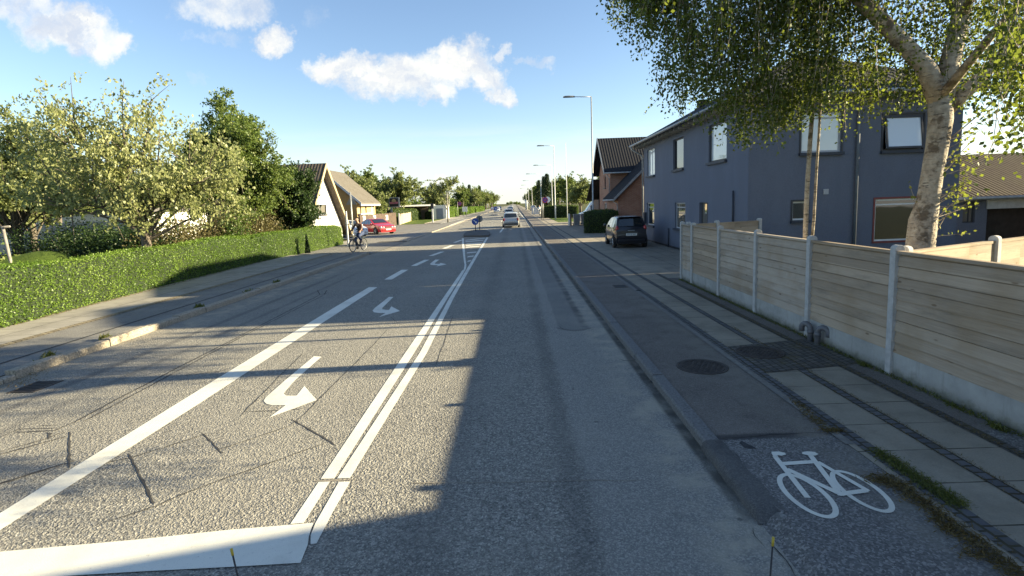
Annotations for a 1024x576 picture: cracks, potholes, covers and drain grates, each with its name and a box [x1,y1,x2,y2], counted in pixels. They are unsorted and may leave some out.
manhole cover [735,346,785,359]
manhole cover [676,359,729,375]
drain grate [6,380,64,394]
